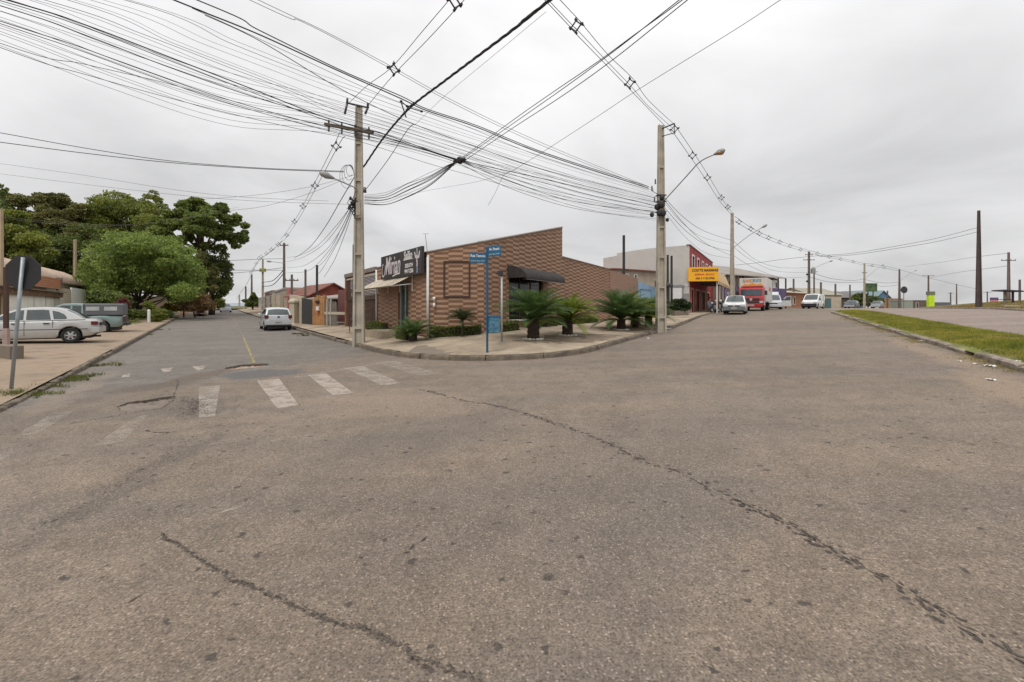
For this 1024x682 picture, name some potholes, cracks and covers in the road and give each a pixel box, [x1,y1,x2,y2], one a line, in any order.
crack [160,532,484,682]
crack [419,389,1024,663]
